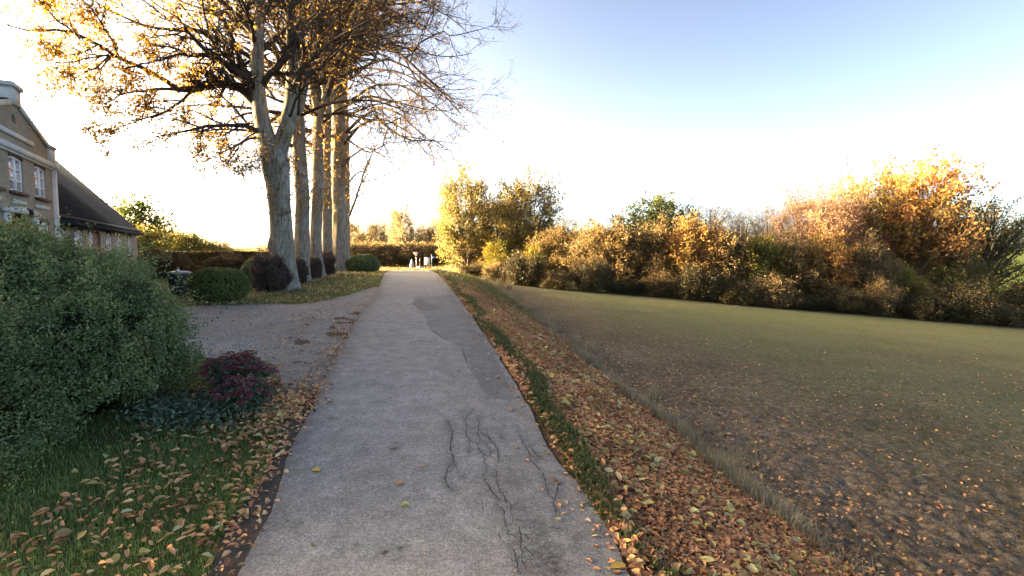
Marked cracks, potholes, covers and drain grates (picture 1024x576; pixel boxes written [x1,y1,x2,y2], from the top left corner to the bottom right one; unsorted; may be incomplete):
crack [516,425,574,536]
crack [444,417,539,573]
